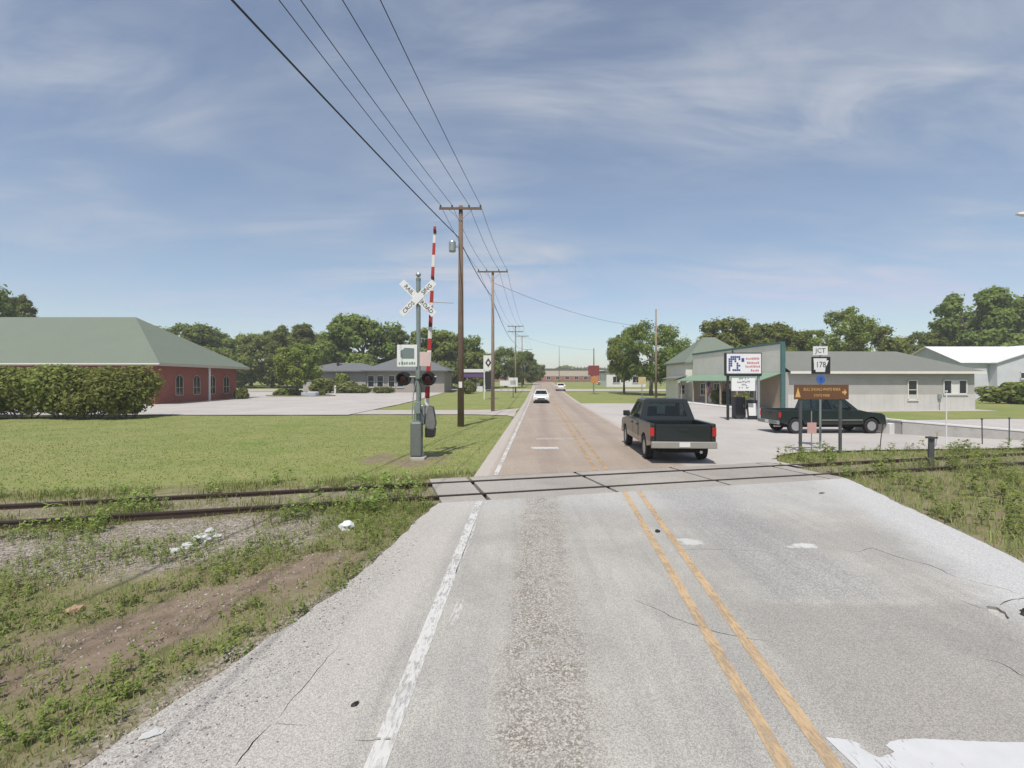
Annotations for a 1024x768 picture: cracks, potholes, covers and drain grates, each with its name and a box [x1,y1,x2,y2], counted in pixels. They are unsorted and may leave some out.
crack [636,600,771,642]
crack [236,651,335,765]
